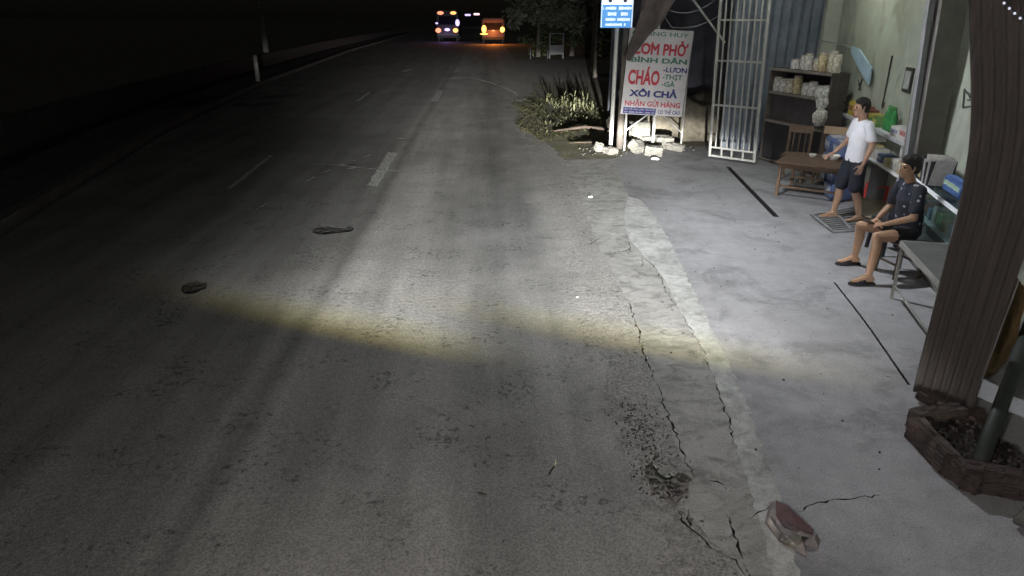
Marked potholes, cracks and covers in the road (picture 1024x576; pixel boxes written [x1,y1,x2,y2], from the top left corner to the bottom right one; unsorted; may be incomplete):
crack [625,298,875,575]
crack [584,238,738,448]
drain grate [810,206,866,233]
pothole [644,463,692,506]
